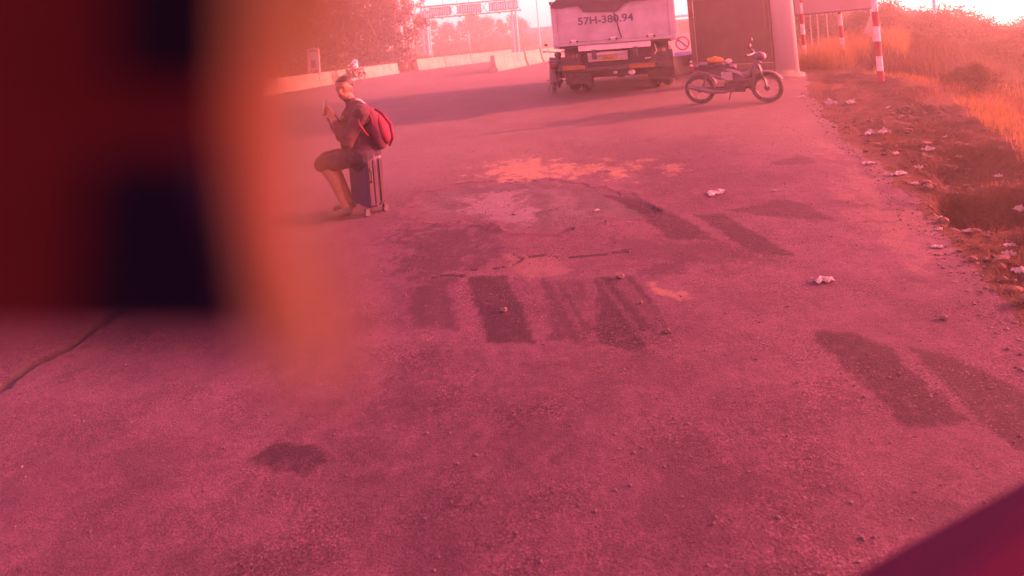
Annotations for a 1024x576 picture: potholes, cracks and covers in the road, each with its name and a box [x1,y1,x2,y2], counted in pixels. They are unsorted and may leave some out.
crack [0,346,77,394]
